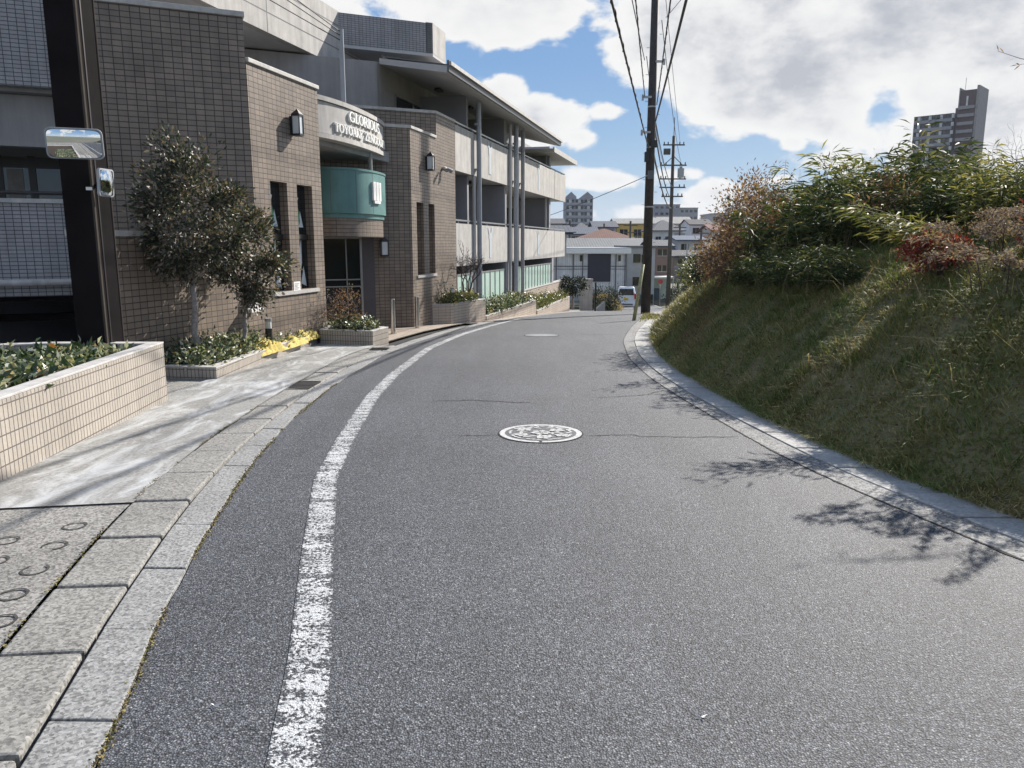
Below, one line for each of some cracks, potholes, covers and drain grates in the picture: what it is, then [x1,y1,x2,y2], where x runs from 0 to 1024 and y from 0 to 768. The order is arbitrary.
manhole cover [498,424,583,443]
drain grate [285,381,321,390]
